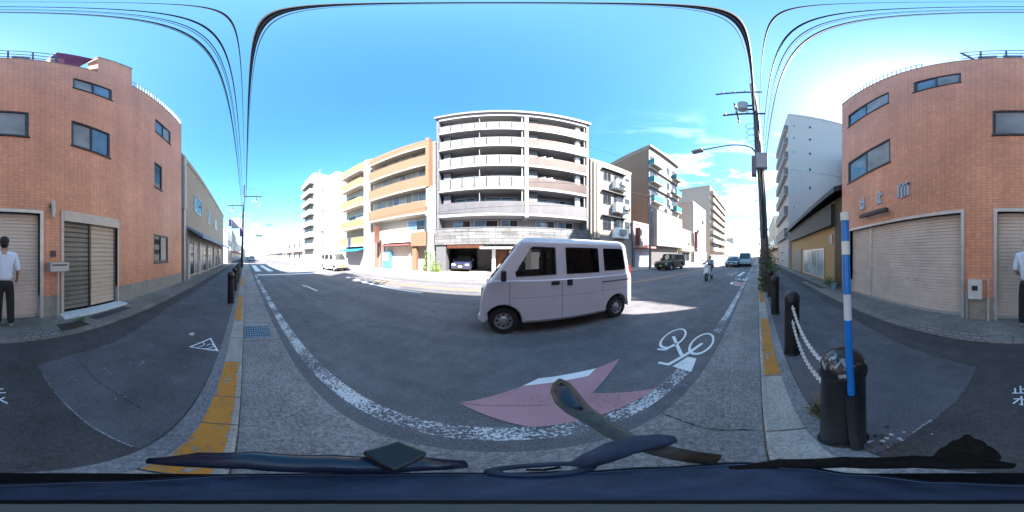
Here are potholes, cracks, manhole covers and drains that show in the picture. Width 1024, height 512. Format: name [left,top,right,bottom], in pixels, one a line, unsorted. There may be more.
drain grate [245,326,272,338]
crack [662,413,749,431]
